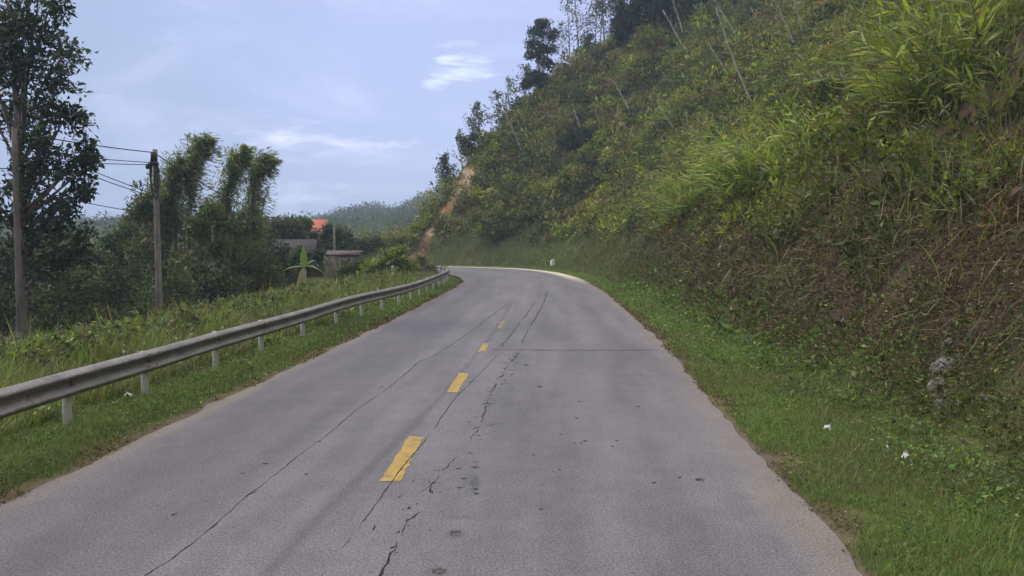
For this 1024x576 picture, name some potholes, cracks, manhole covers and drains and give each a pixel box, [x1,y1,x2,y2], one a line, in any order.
crack [144,307,504,576]
crack [321,292,660,576]
